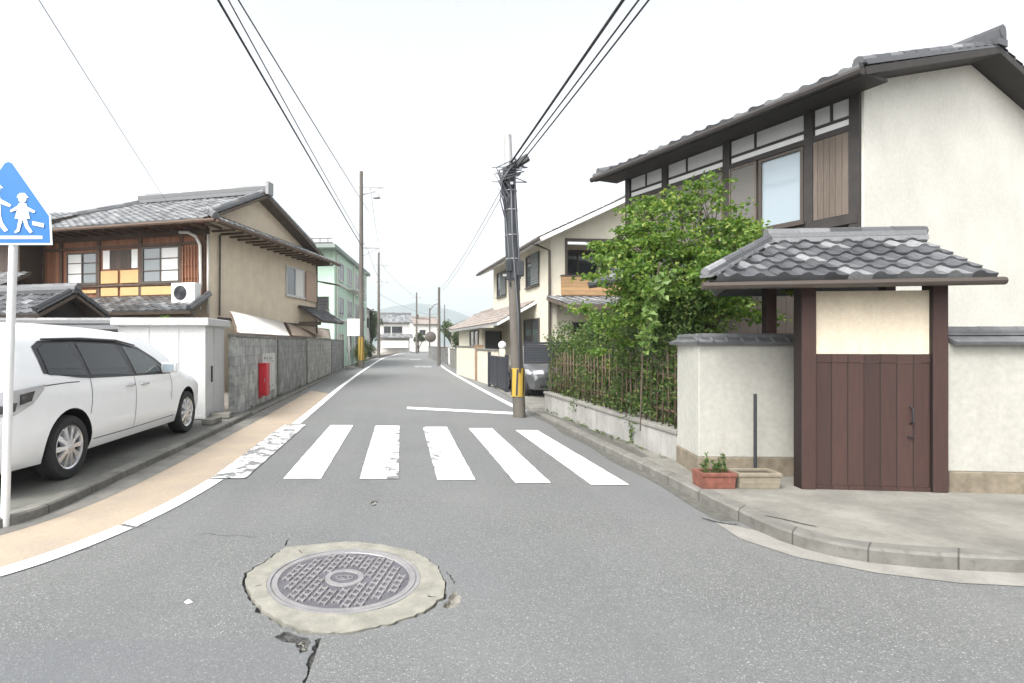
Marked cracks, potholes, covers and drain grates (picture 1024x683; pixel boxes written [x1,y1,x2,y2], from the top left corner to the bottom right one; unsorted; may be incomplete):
crack [302,638,321,683]
crack [242,539,456,627]
manhole cover [245,541,445,635]
